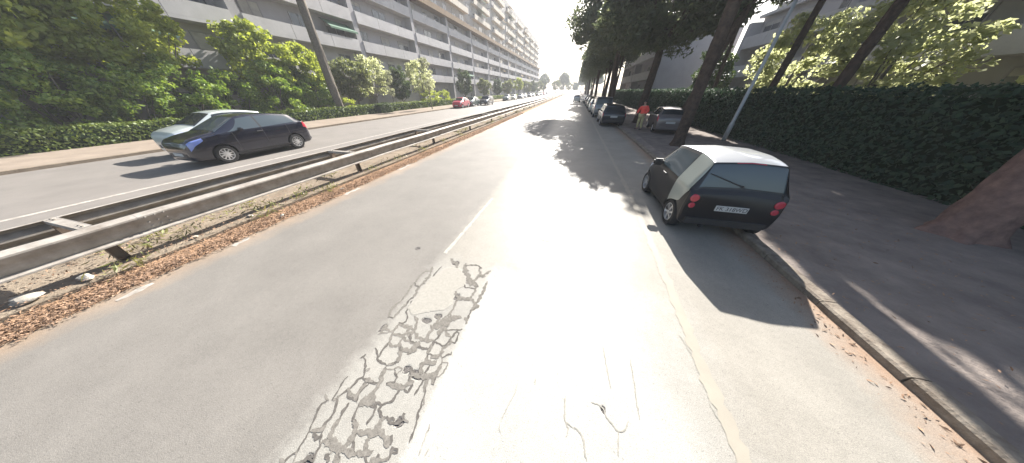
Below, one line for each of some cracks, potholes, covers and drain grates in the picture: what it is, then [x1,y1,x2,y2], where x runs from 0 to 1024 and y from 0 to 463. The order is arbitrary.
crack [279,258,491,463]
crack [563,348,640,461]
